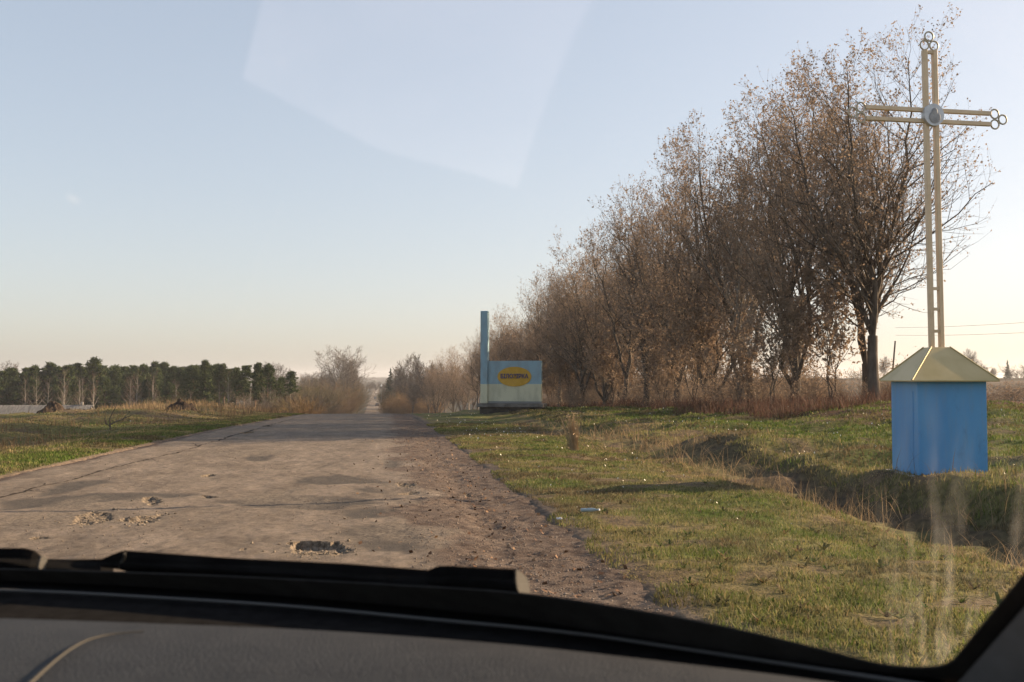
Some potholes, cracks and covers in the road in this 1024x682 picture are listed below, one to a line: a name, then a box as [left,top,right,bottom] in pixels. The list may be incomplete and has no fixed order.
pothole [54,507,158,530]
pothole [106,512,177,528]
pothole [251,537,358,559]
pothole [126,496,163,509]
crack [0,415,305,498]
